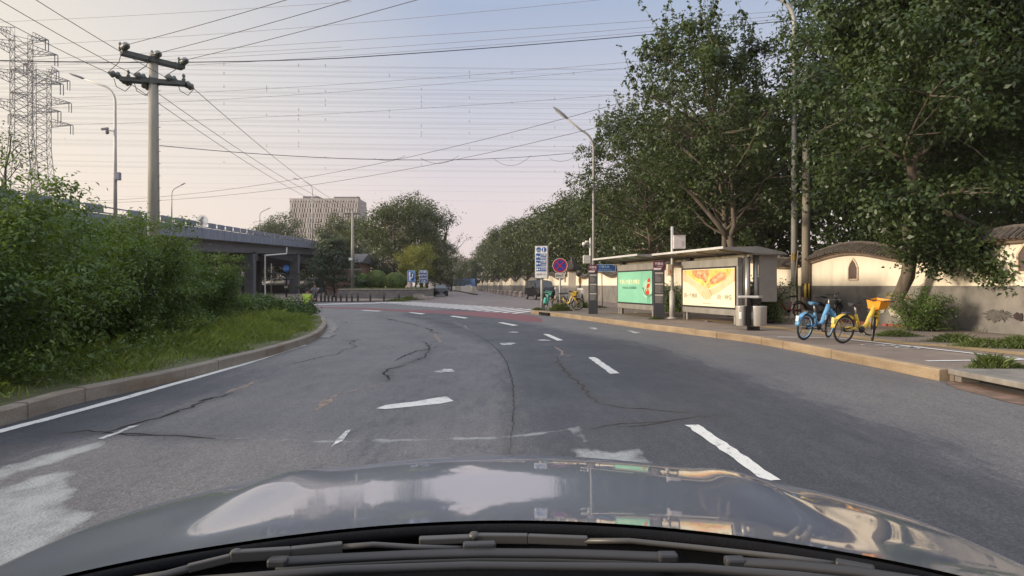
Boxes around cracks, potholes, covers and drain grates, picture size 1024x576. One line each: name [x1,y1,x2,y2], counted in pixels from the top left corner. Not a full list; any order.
crack [555,347,721,429]
crack [67,382,254,438]
crack [314,315,470,411]
